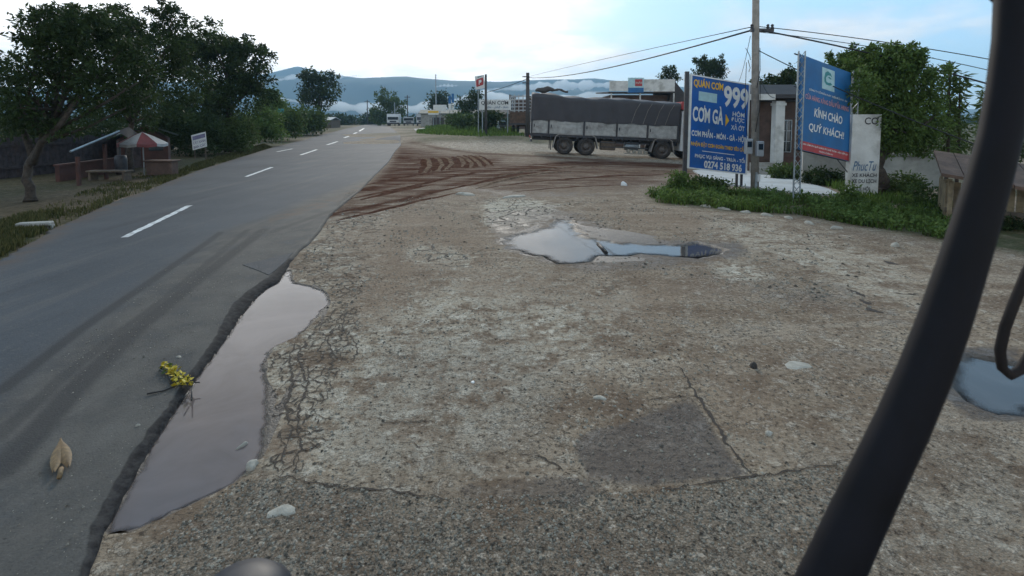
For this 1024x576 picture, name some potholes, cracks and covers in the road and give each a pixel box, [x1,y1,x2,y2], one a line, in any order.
pothole [499,219,730,264]
crack [268,210,448,500]
crack [485,201,549,224]
pothole [951,350,1024,417]
pothole [105,267,331,534]
